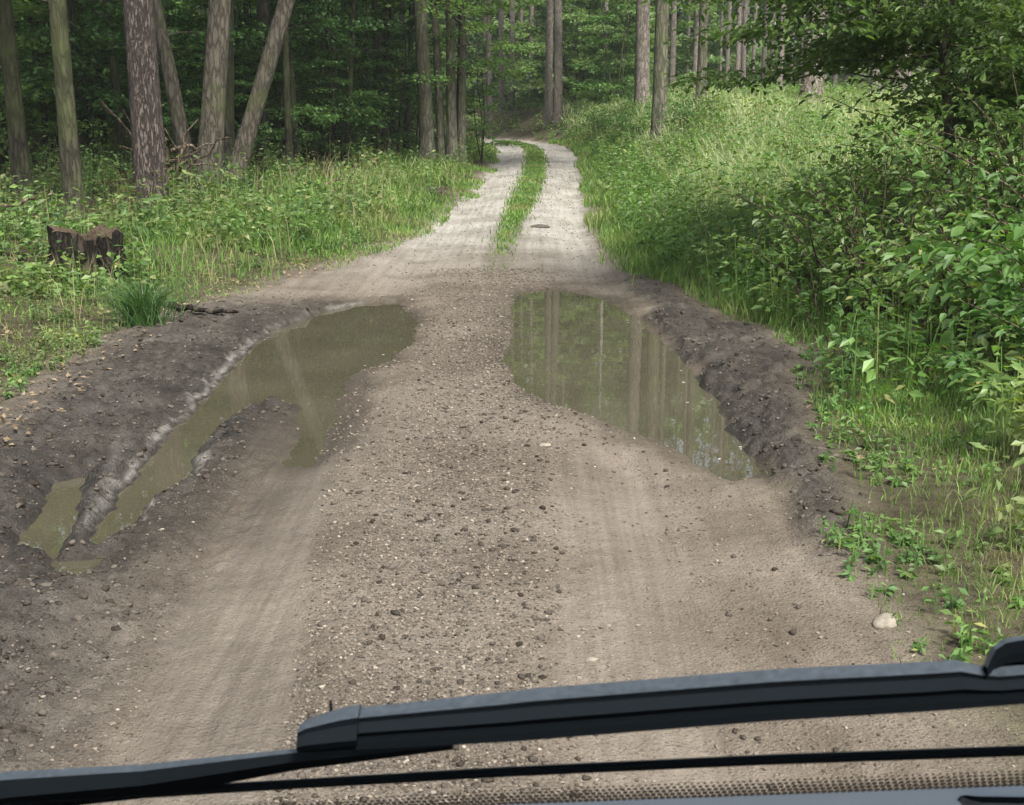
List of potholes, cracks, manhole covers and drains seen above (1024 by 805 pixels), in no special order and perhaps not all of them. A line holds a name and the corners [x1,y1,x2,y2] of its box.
pothole [0,457,132,582]
pothole [76,297,429,558]
pothole [490,285,794,483]
